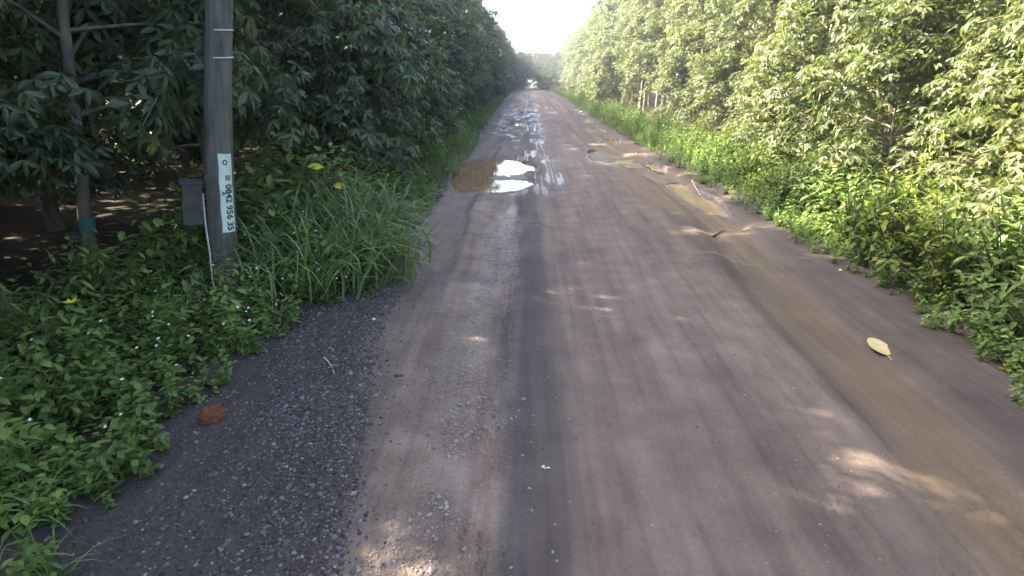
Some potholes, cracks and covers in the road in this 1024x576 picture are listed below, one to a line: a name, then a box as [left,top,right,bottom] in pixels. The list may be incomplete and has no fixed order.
pothole [448,159,540,194]
pothole [665,182,733,219]
pothole [586,149,644,171]
pothole [645,162,671,175]
